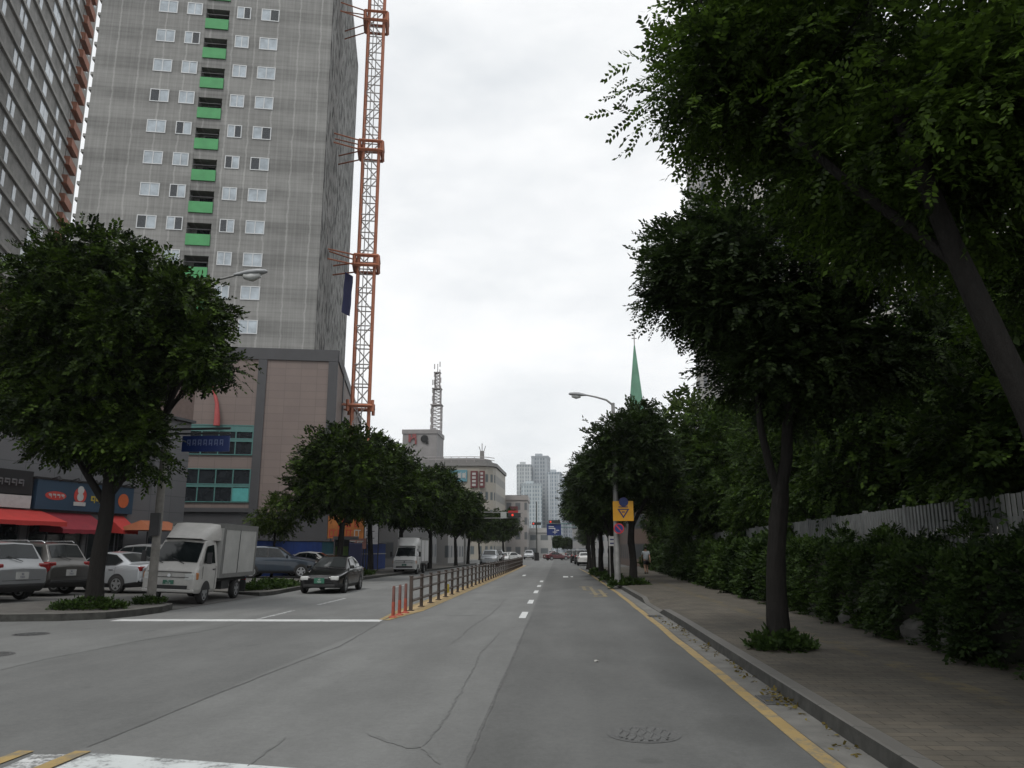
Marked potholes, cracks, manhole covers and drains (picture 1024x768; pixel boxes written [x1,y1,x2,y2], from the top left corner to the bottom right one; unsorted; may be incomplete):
manhole cover [607,726,681,743]
crack [367,600,504,764]
